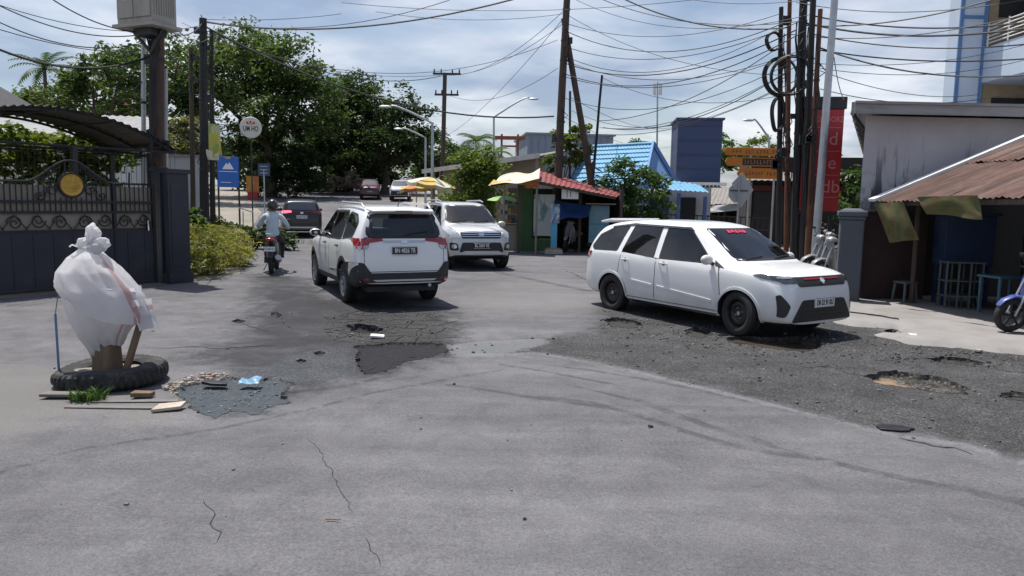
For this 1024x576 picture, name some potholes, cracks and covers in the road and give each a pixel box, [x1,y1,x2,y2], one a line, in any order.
pothole [864,370,971,395]
crack [323,309,458,344]
pothole [600,317,643,328]
pothole [927,356,983,367]
crack [310,441,380,561]
pothole [346,323,384,334]
pothole [999,391,1024,401]
